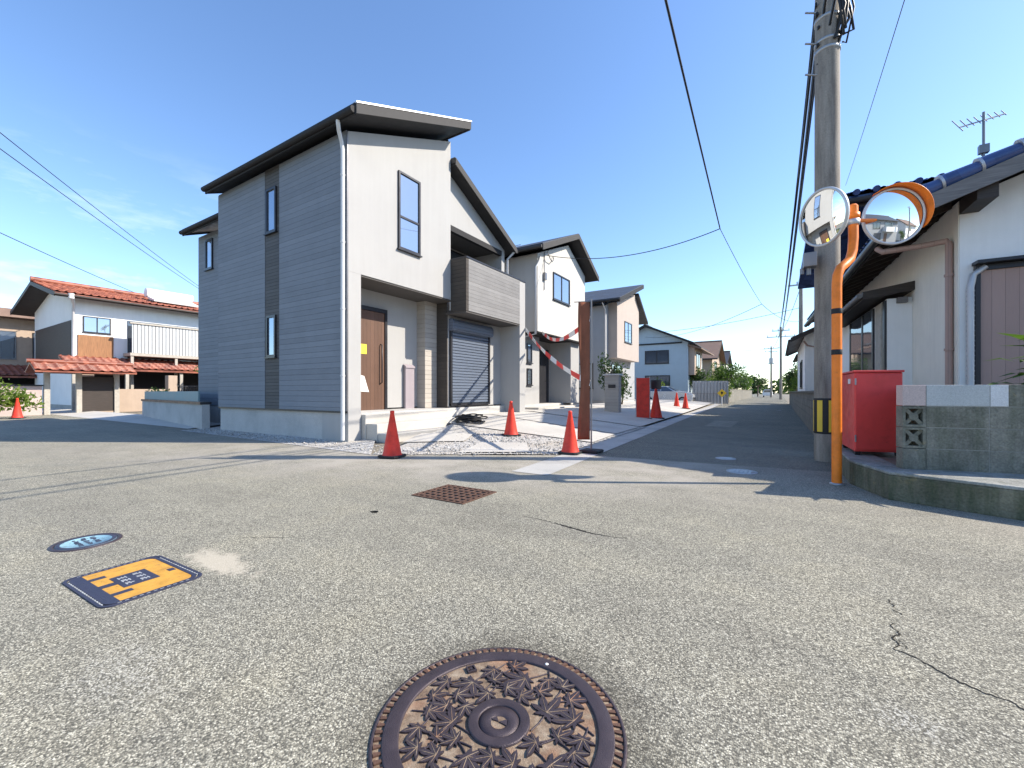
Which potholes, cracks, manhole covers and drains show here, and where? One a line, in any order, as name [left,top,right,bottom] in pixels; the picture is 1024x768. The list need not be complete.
drain grate [411,484,497,505]
crack [529,517,621,538]
manhole cover [368,647,628,768]
crack [888,599,1024,710]
manhole cover [62,556,202,609]
manhole cover [47,533,123,552]
